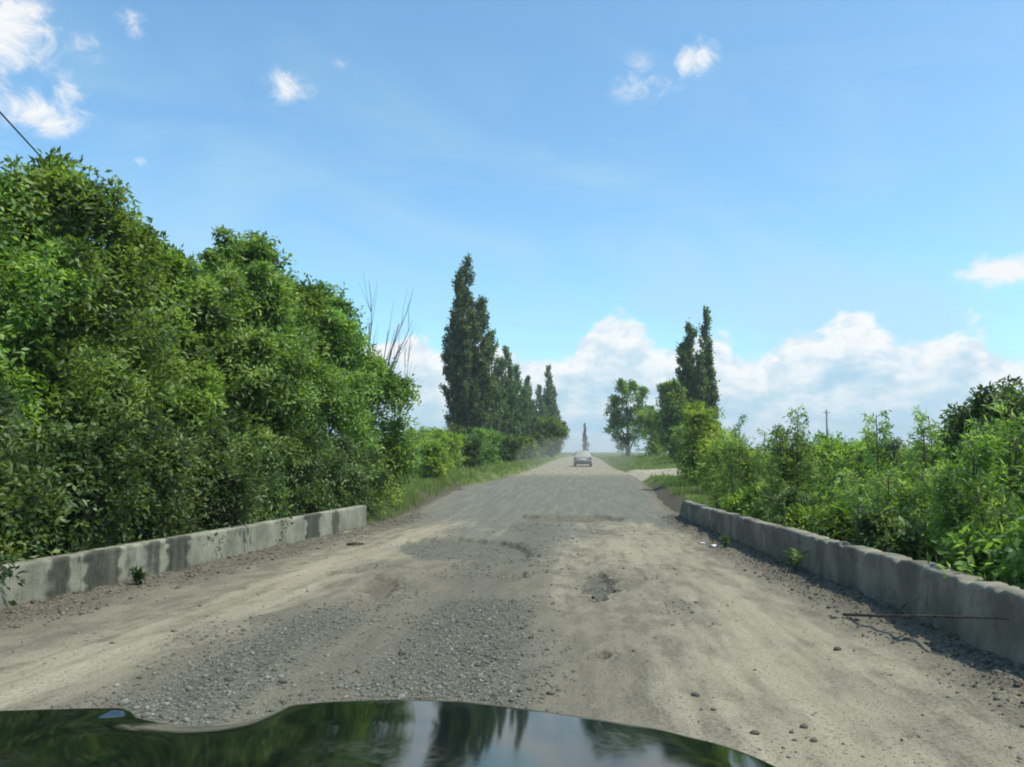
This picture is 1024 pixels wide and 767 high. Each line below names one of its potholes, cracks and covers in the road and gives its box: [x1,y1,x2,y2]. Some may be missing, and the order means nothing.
pothole [586,648,618,663]
pothole [573,571,628,603]
pothole [394,536,541,562]
